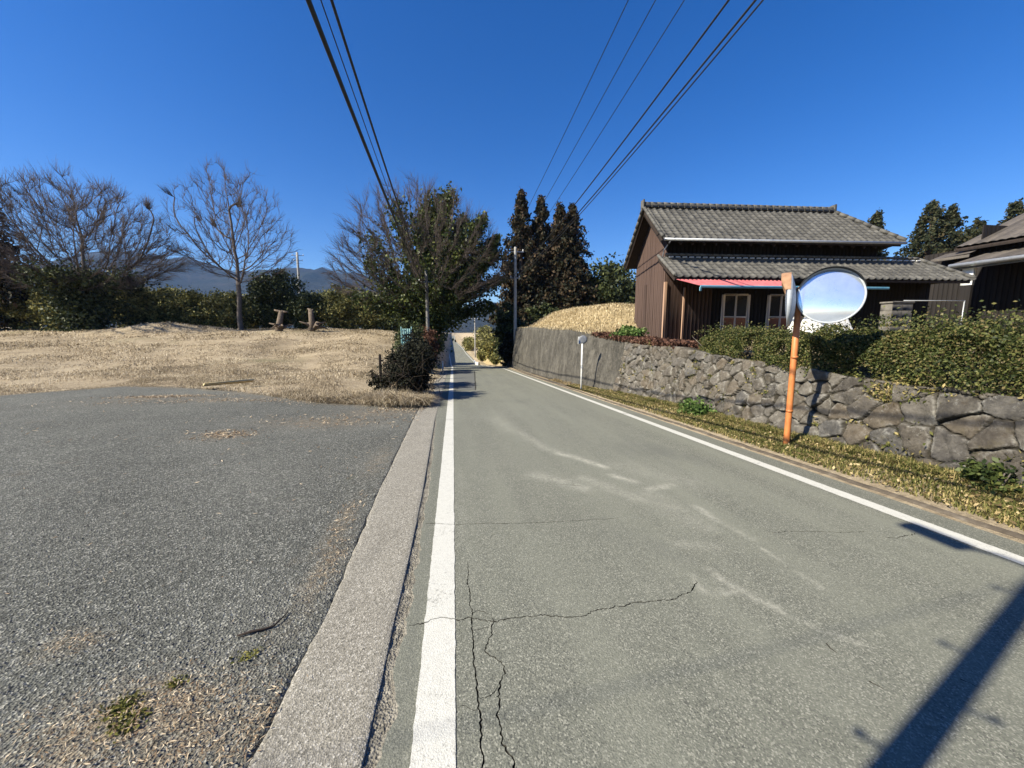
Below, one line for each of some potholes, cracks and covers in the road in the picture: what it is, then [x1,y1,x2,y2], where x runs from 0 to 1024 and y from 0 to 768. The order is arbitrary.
crack [363,420,698,768]
